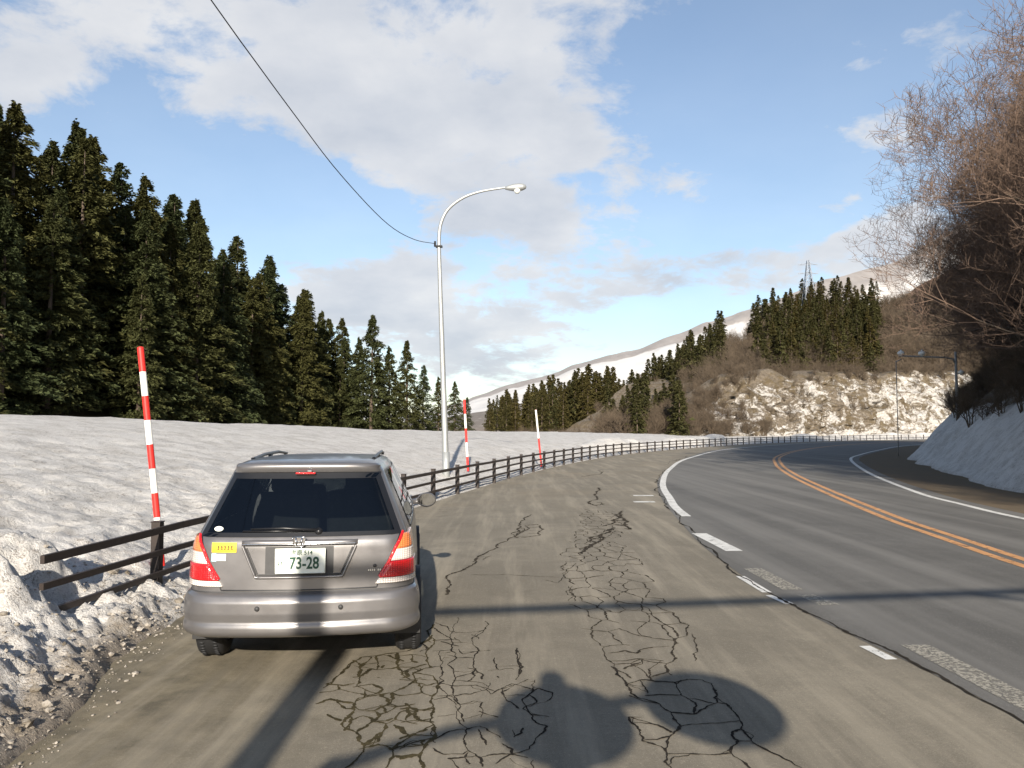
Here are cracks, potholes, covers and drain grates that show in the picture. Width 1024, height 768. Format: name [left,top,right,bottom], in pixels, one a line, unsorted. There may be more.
crack [445,470,802,768]
crack [315,618,553,768]
